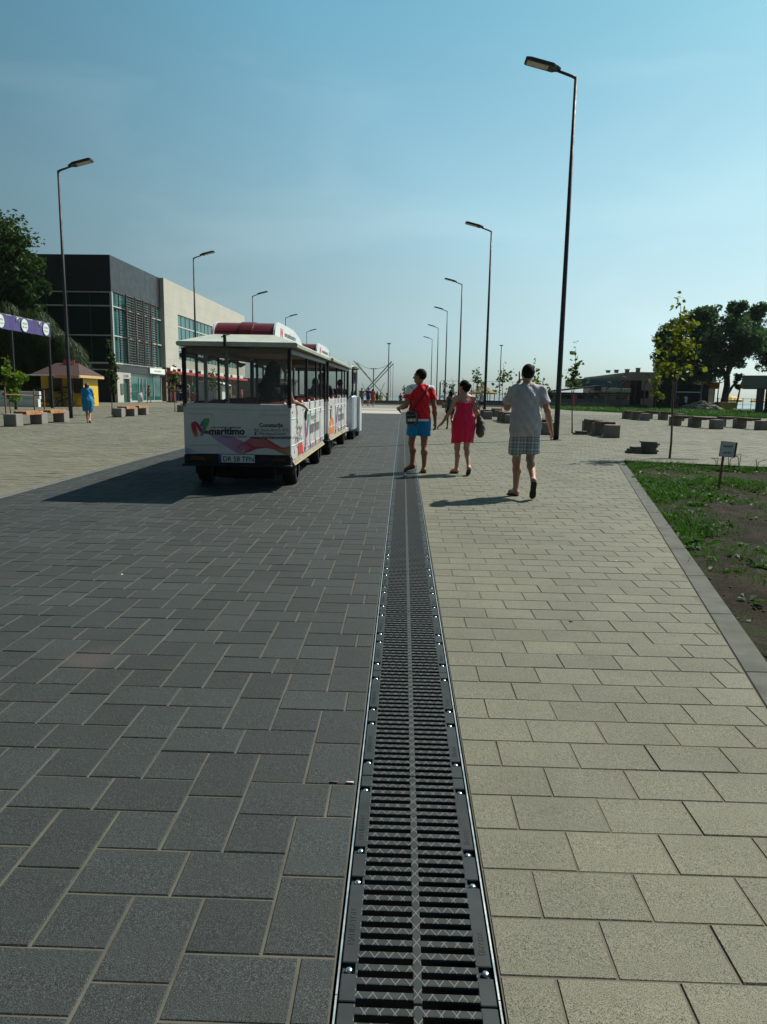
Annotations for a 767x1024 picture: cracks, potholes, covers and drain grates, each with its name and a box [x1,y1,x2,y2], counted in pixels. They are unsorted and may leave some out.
drain grate [387,523,427,545]
drain grate [394,469,417,477]
drain grate [392,485,420,496]
drain grate [336,1003,500,1024]
drain grate [393,477,418,486]
drain grate [389,508,424,524]
drain grate [362,671,463,780]
drain grate [390,495,422,508]
drain grate [338,776,497,1012]
drain grate [380,571,437,612]
drain grate [384,544,431,573]
drain grate [373,611,447,673]
